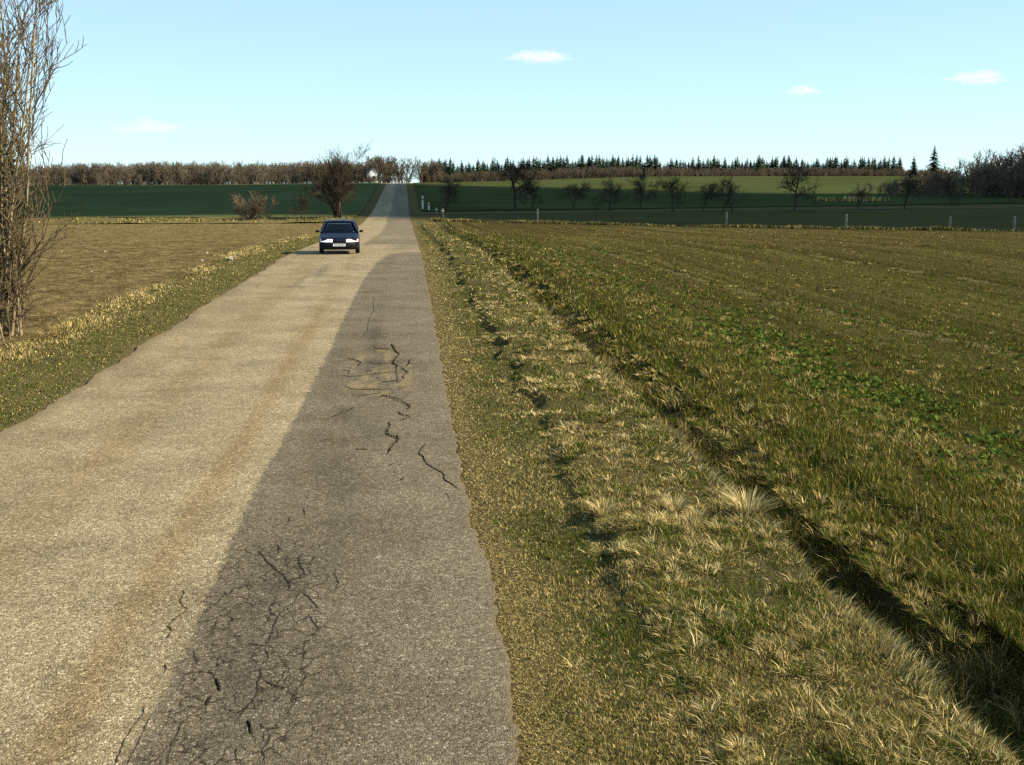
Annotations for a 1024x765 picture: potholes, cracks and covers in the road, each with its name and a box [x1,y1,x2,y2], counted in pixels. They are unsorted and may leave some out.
crack [418,444,458,500]
crack [115,691,153,764]
crack [167,655,219,763]
crack [210,509,339,765]
crack [332,296,410,480]
